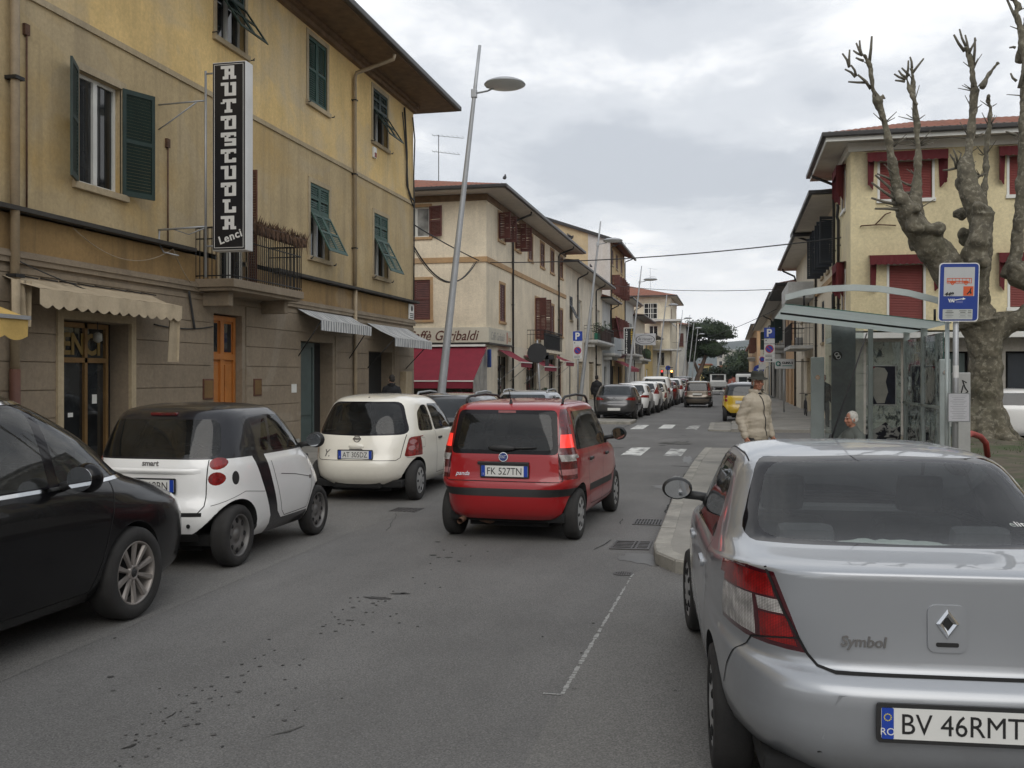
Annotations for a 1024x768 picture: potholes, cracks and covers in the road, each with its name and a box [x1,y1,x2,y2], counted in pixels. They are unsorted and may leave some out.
drain grate [609,540,653,550]
